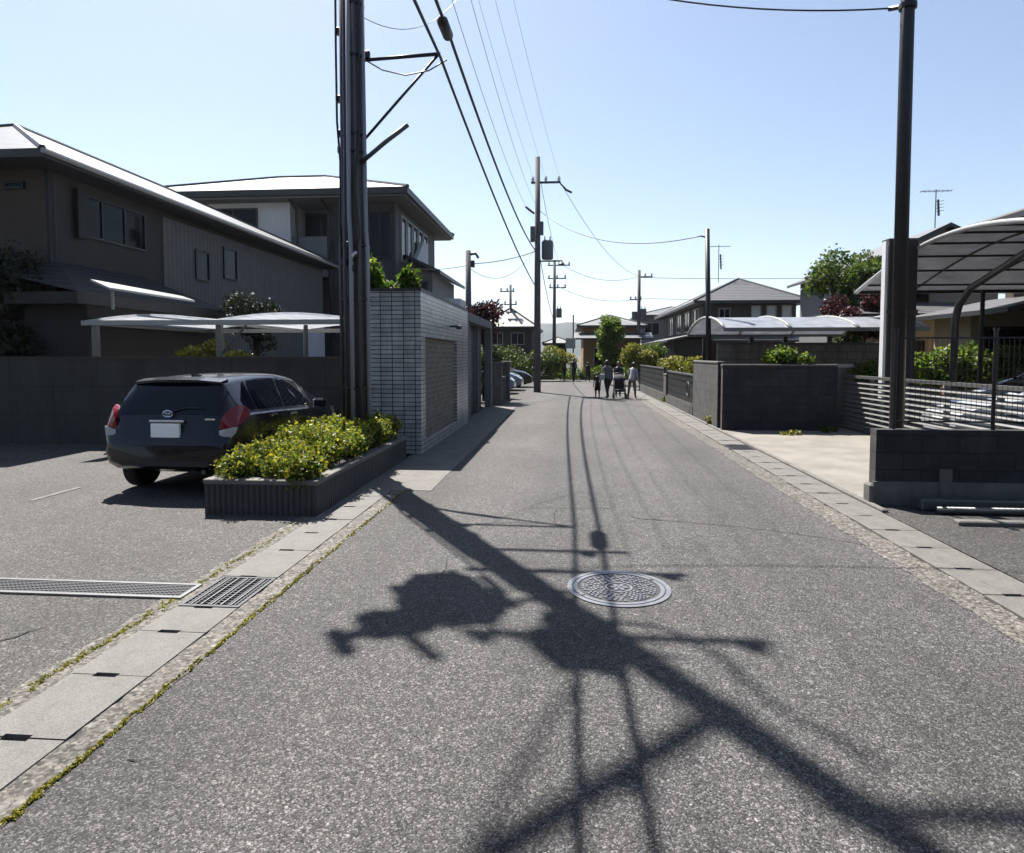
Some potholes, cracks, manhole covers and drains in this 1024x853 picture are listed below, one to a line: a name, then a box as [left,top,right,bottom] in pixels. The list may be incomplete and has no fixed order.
drain grate [0,577,203,599]
manhole cover [567,570,671,608]
drain grate [178,576,276,609]
